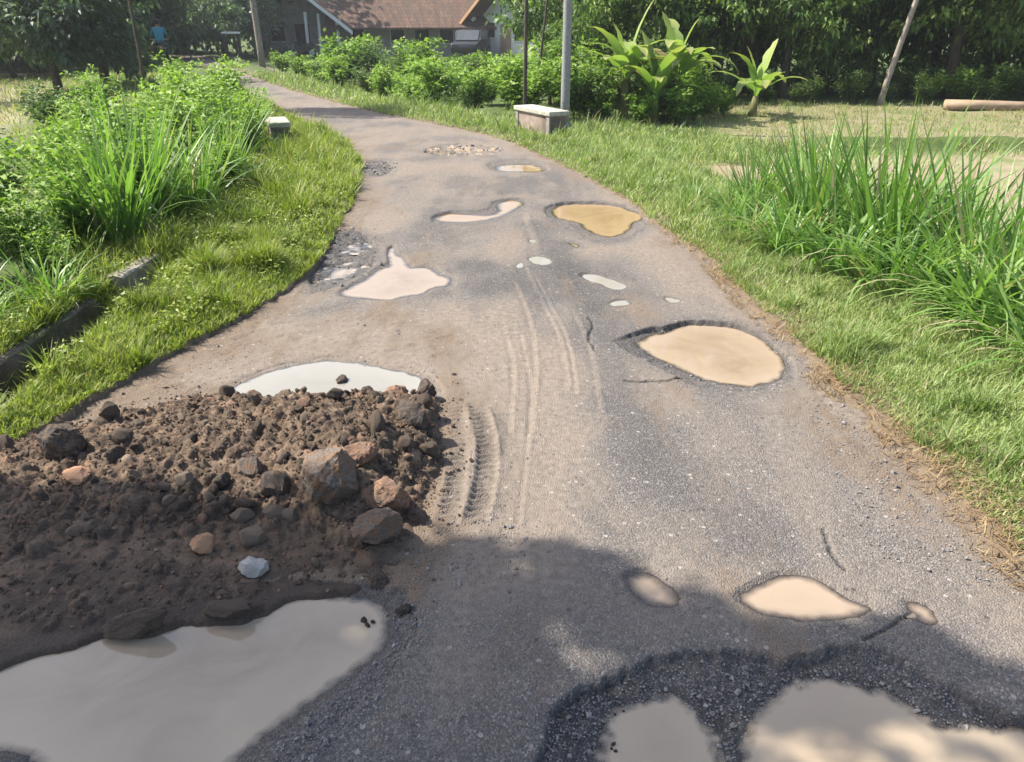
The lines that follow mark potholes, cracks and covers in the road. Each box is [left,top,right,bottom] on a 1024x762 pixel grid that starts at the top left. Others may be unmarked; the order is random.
pothole [333,244,460,301]
pothole [486,159,551,173]
pothole [423,143,502,156]
pothole [605,297,636,308]
pothole [429,198,532,226]
pothole [577,271,632,291]
pothole [534,641,1024,762]
pothole [305,229,381,294]
crack [860,614,909,641]
crack [586,317,598,351]
pothole [525,254,557,266]
pothole [363,159,395,177]
